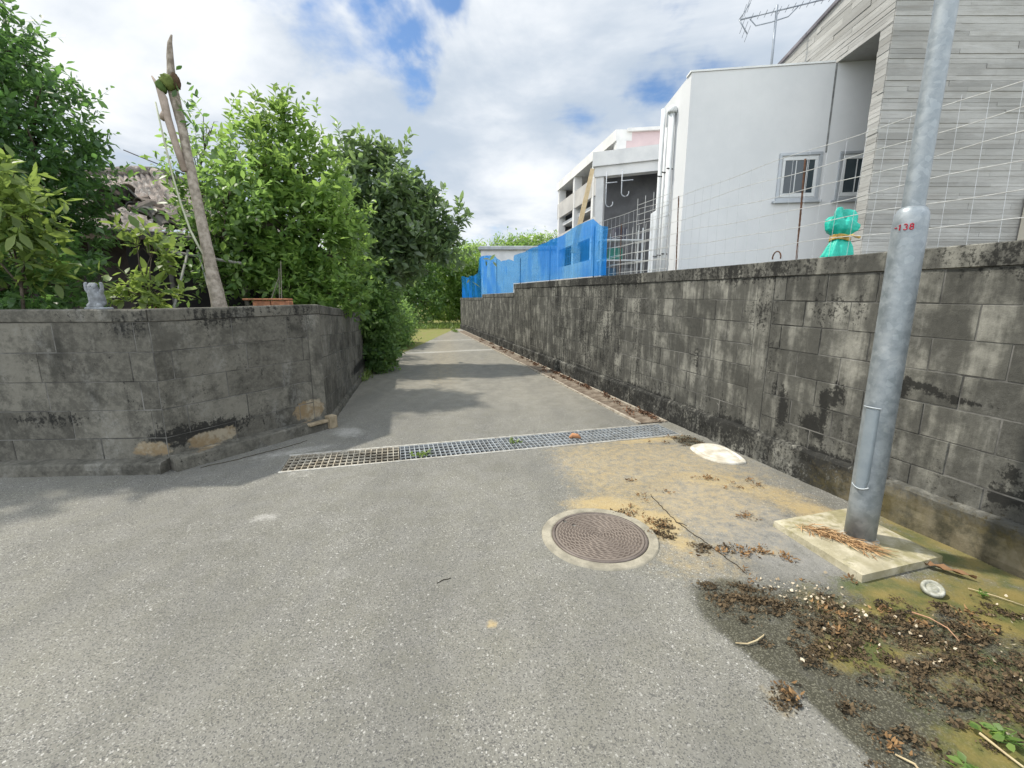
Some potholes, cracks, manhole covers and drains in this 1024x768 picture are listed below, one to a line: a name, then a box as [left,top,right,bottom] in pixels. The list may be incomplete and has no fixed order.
drain grate [281,447,399,471]
manhole cover [542,508,659,571]
drain grate [496,431,597,450]
drain grate [582,425,678,442]
crack [651,496,746,574]
drain grate [400,439,504,460]
manhole cover [690,443,746,465]
